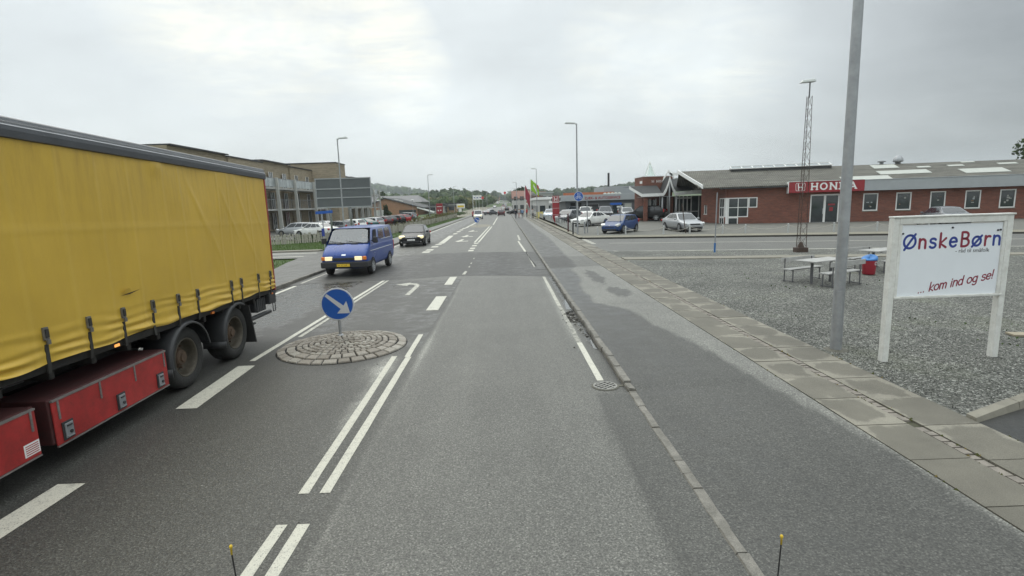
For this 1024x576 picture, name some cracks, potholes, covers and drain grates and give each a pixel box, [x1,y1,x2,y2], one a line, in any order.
pothole [562,310,581,323]
drain grate [592,381,624,391]
